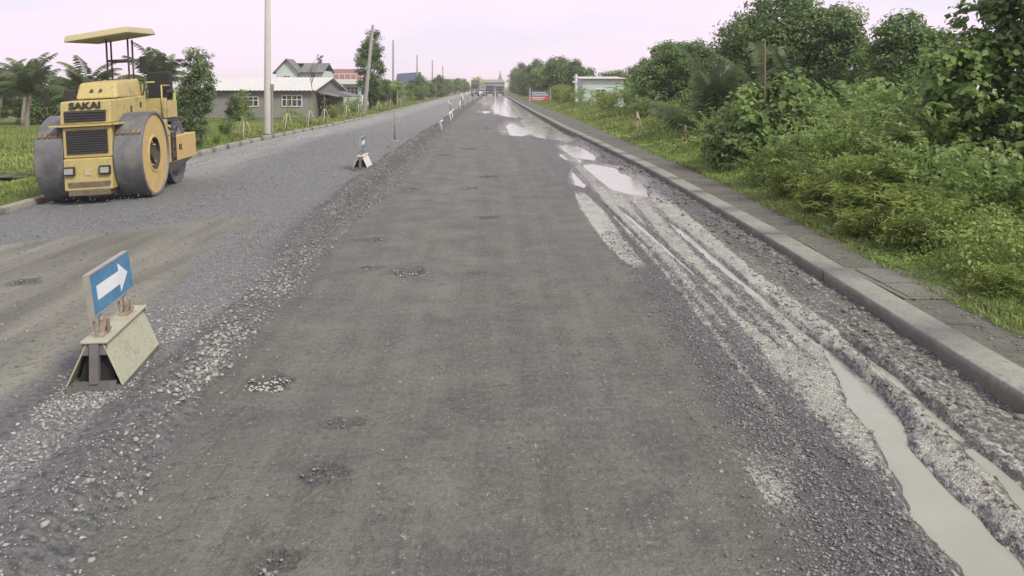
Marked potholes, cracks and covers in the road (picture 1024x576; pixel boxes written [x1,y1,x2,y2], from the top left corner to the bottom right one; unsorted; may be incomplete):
pothole [223,543,322,576]
pothole [231,368,309,399]
pothole [305,414,381,435]
pothole [378,264,439,282]
pothole [280,458,366,494]
pothole [3,277,43,286]
